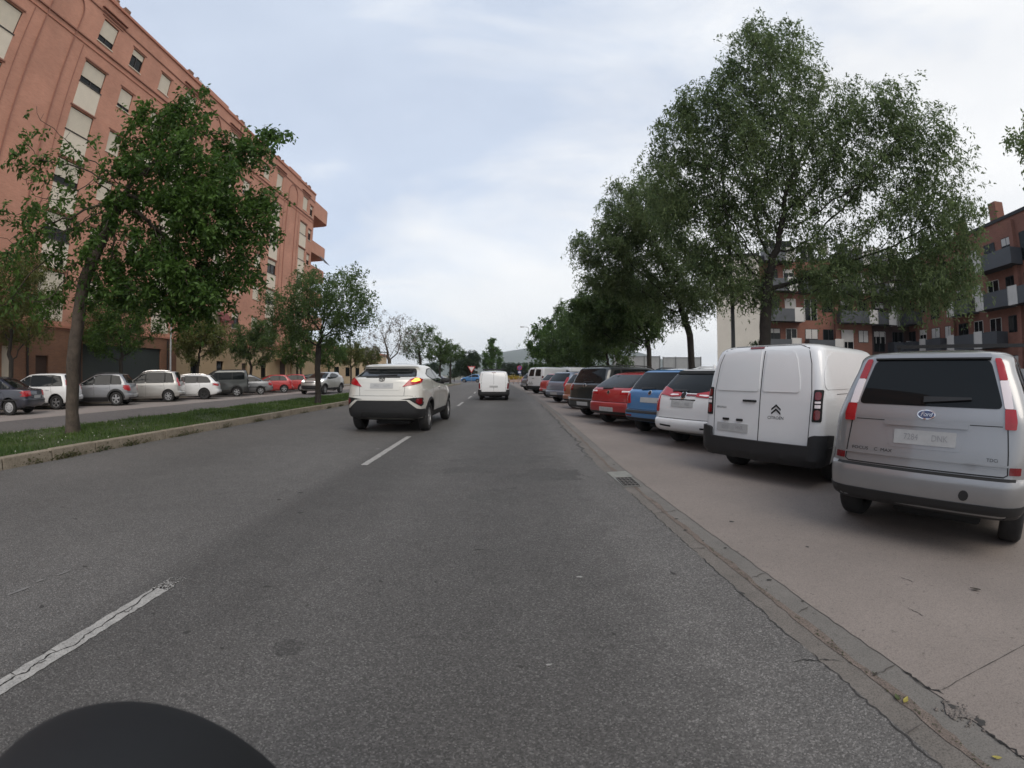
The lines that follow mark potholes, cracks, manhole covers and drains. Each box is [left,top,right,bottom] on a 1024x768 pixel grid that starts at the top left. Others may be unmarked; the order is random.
crack [0,586,162,686]
drain grate [607,471,641,487]
